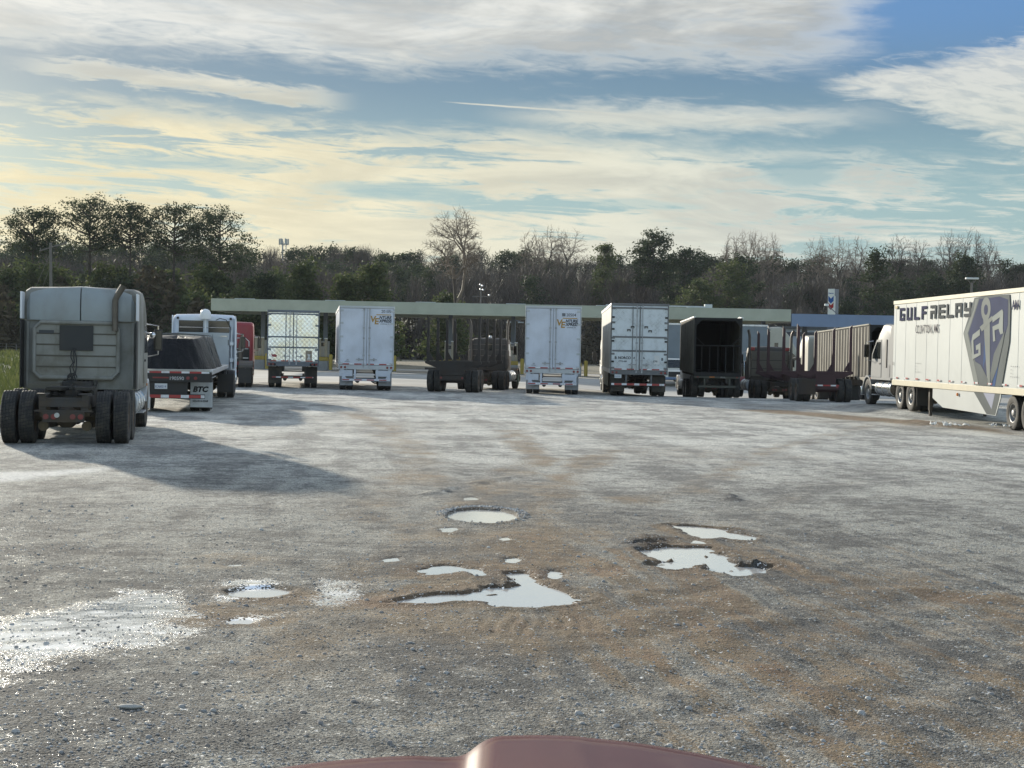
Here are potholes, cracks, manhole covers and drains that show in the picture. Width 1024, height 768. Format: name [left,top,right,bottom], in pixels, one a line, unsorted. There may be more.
pothole [404,563,497,576]
pothole [658,523,767,541]
pothole [215,583,303,599]
pothole [628,542,779,577]
pothole [538,567,571,580]
pothole [376,569,596,611]
pothole [441,507,524,524]
